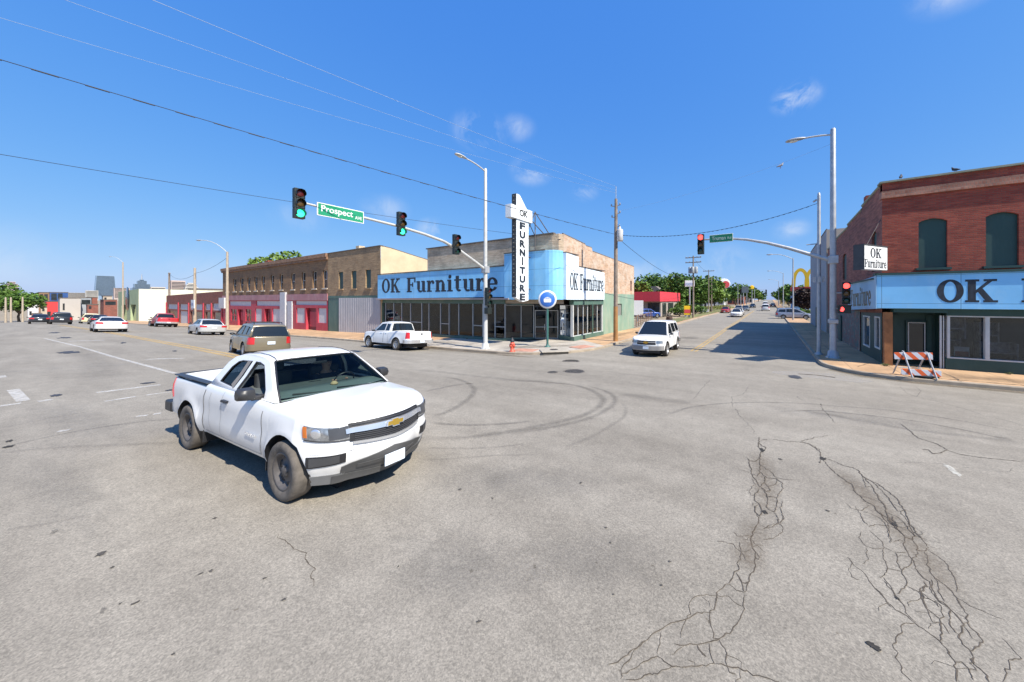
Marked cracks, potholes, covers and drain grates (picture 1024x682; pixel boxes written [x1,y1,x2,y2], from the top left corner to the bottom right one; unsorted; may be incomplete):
crack [610,437,1022,682]
crack [277,534,316,586]
crack [904,426,1022,462]
